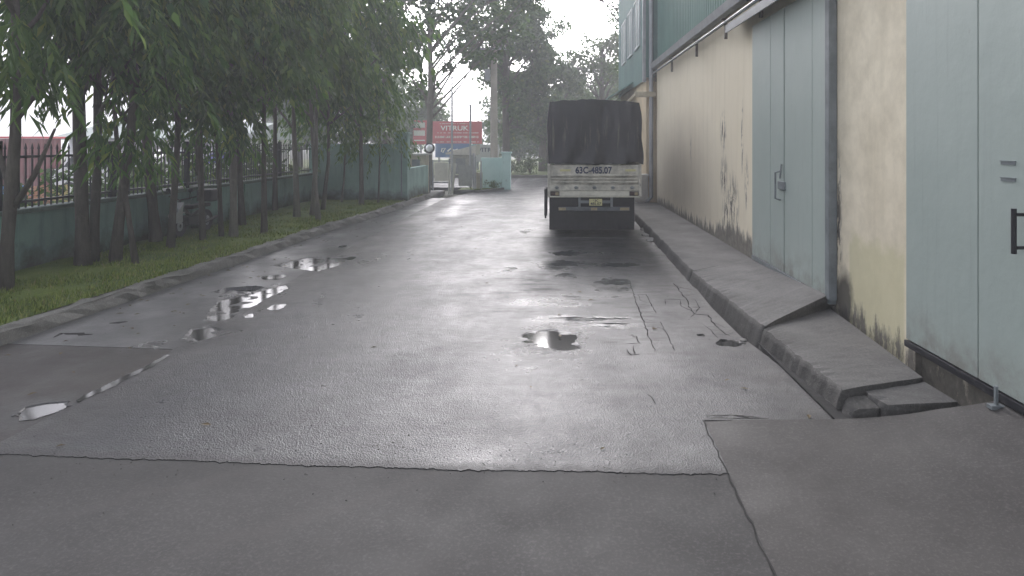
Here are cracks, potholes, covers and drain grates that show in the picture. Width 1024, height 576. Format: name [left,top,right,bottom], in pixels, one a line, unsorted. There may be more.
pothole [203,283,291,322]
pothole [11,400,73,421]
crack [550,280,732,355]
pothole [271,252,363,271]
pothole [182,325,226,342]
pothole [516,329,581,351]
